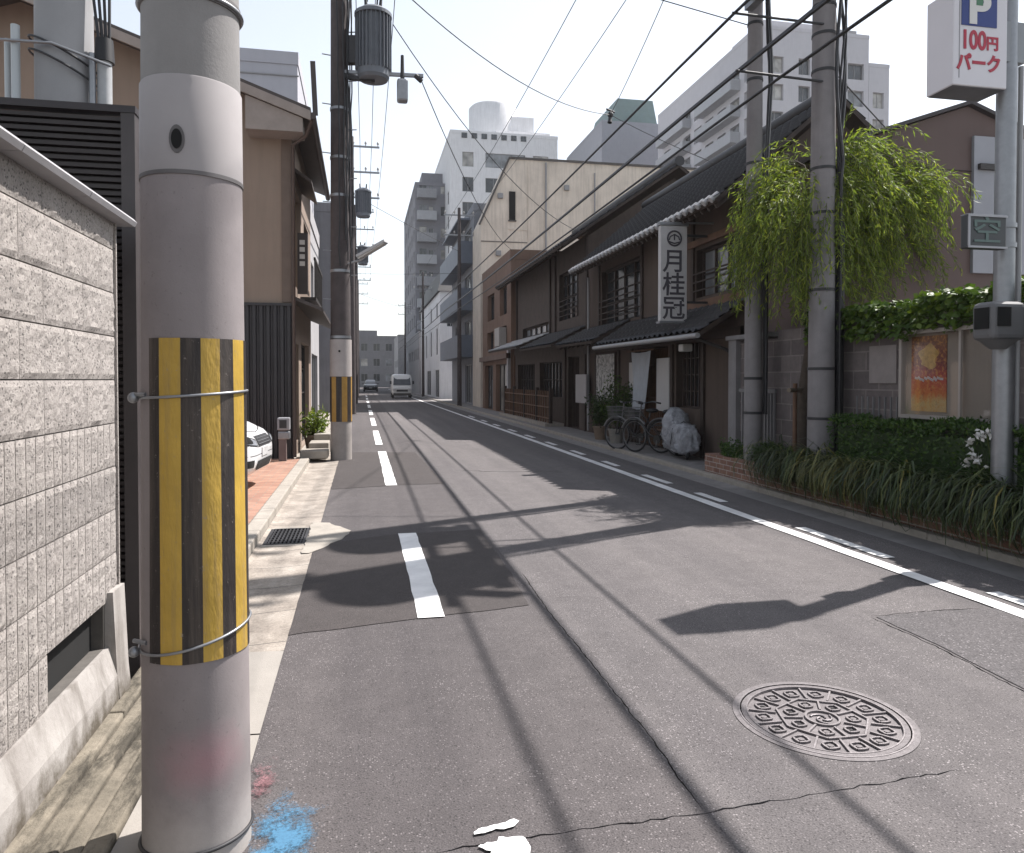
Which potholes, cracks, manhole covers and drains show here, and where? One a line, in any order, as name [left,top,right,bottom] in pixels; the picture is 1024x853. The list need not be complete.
manhole cover [733,682,921,762]
drain grate [261,526,310,547]
